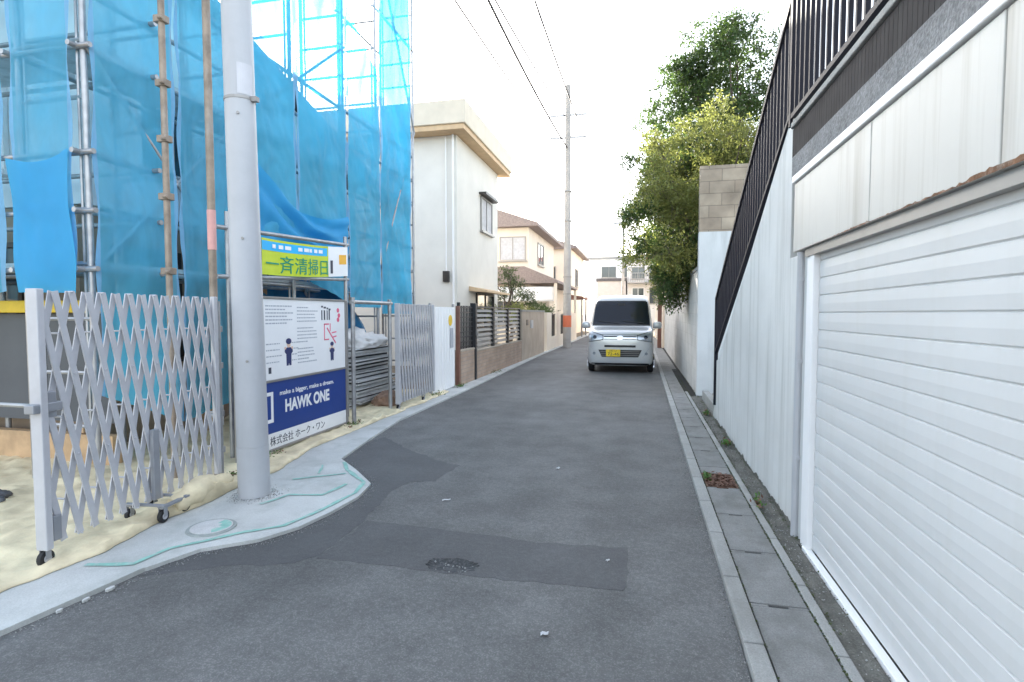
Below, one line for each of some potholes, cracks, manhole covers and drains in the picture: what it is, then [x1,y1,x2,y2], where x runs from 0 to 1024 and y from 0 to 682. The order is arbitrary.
pothole [426,558,480,573]
manhole cover [185,518,237,537]
